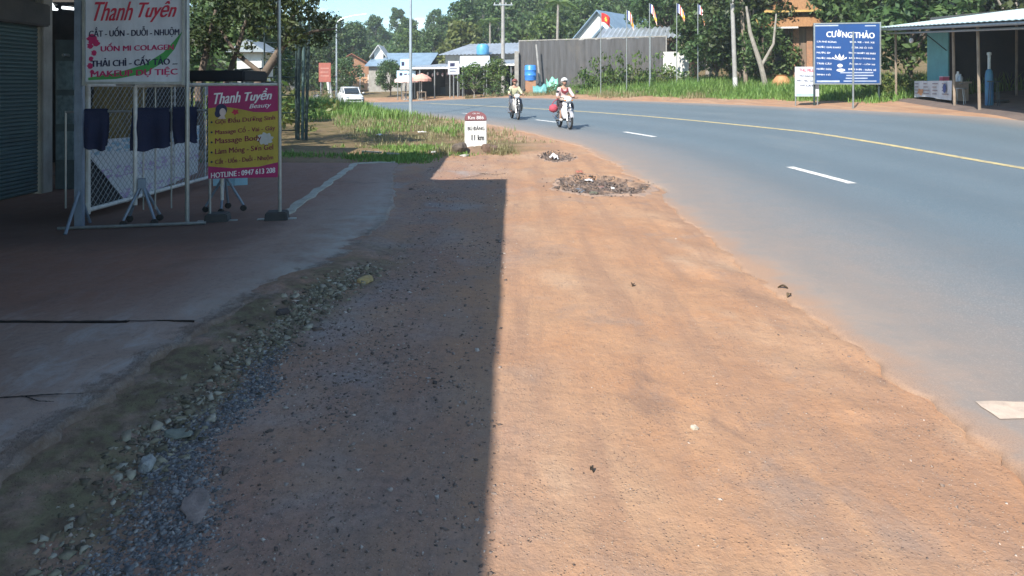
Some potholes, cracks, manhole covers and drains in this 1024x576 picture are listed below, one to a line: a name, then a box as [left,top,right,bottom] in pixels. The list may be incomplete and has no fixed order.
crack [0,393,83,402]
pothole [536,150,579,163]
pothole [542,173,659,199]
